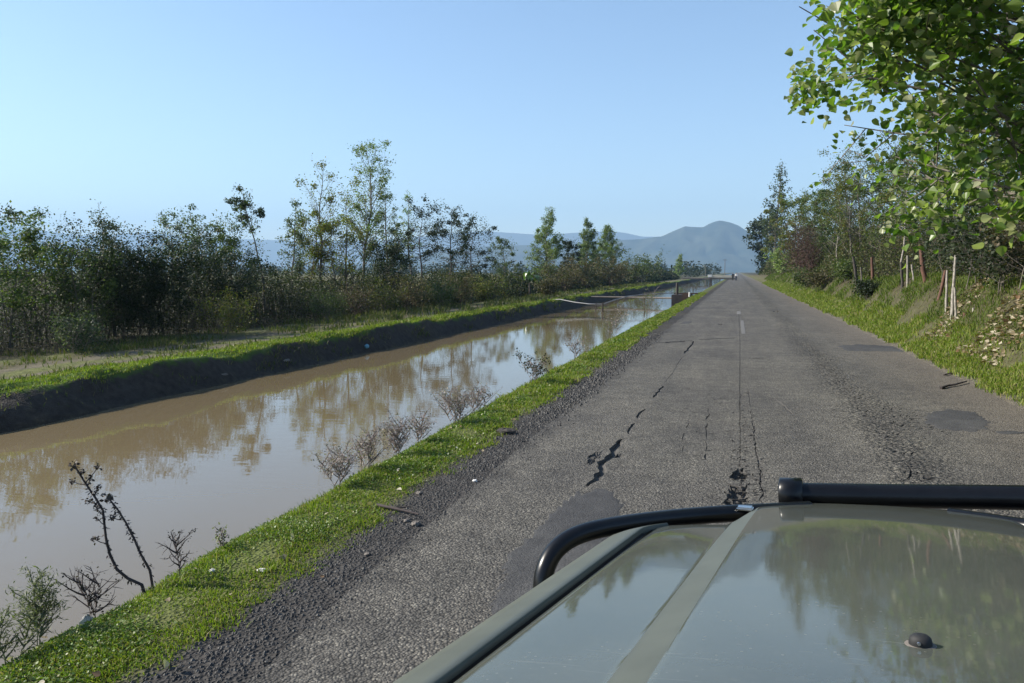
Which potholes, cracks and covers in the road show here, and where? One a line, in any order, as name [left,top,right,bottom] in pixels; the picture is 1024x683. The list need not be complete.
crack [586,321,740,486]
crack [803,346,949,481]
crack [671,391,771,505]
